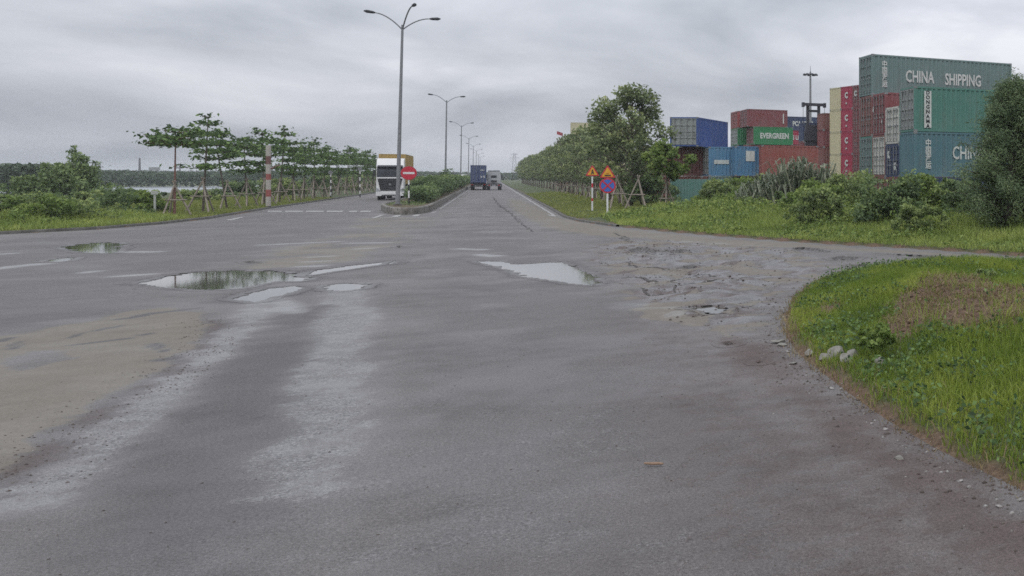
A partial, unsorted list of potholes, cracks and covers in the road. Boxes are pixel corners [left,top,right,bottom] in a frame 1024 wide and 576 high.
pothole [114,269,326,292]
pothole [673,303,742,315]
pothole [467,260,614,287]
pothole [217,285,315,304]
pothole [309,282,384,292]
pothole [45,242,137,254]
crack [626,262,749,296]
